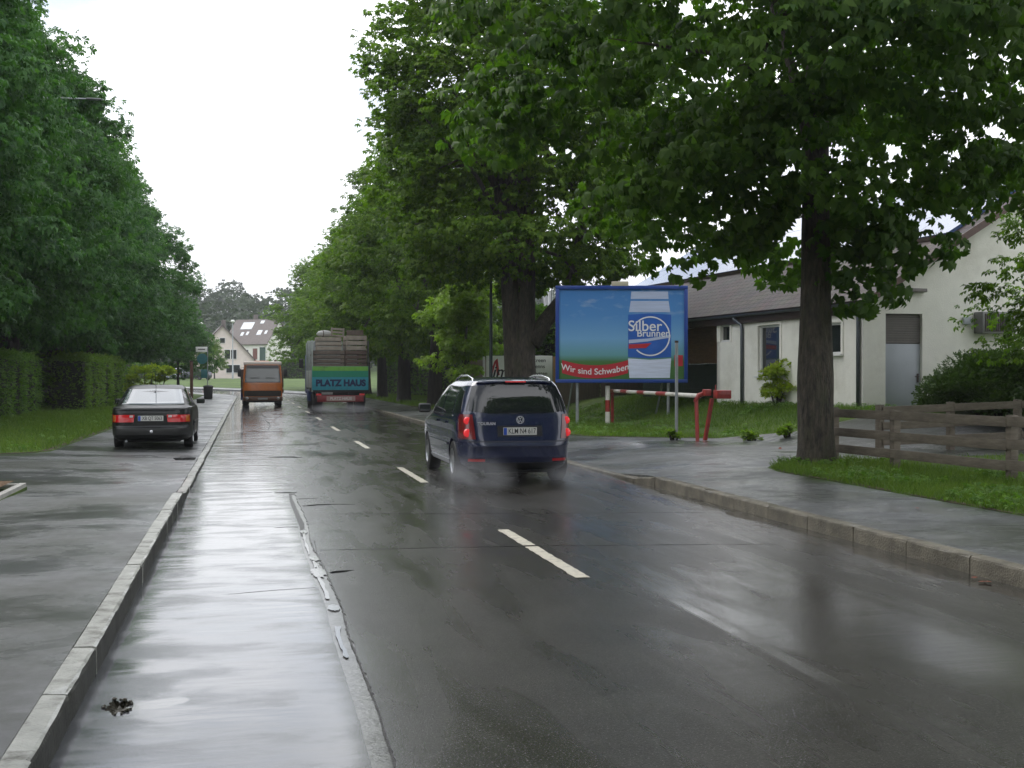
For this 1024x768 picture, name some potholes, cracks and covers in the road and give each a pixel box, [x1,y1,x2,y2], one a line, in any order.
crack [257,414,316,458]
